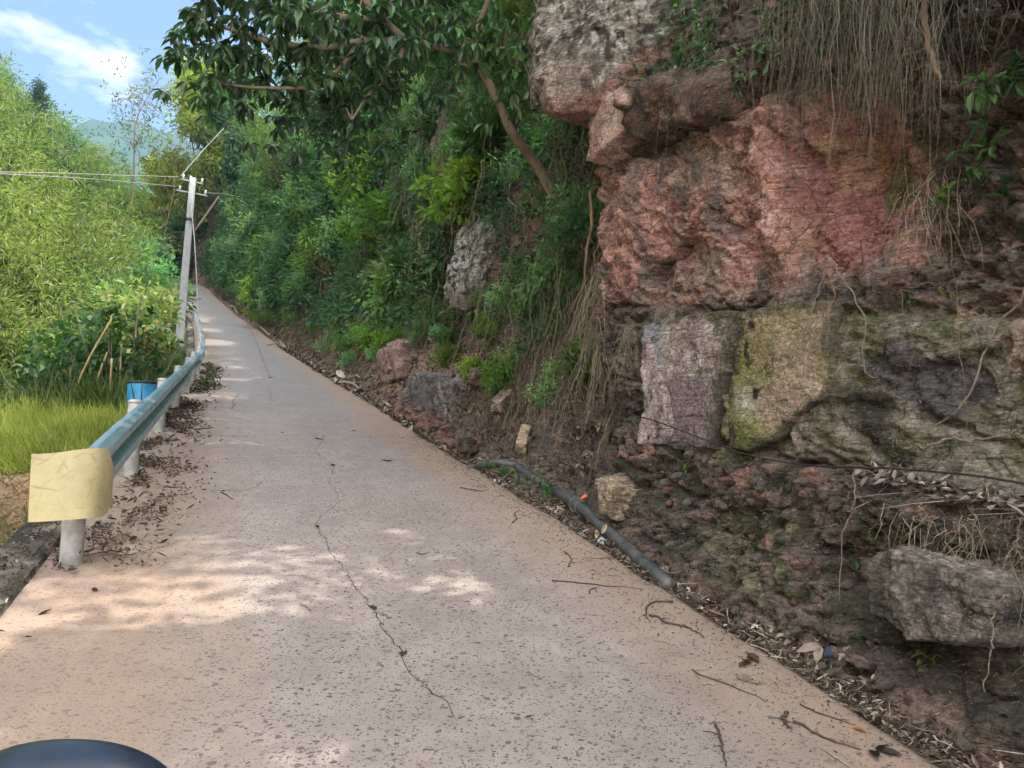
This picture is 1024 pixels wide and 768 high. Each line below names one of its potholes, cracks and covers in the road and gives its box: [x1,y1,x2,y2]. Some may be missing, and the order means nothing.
crack [314,432,458,721]
